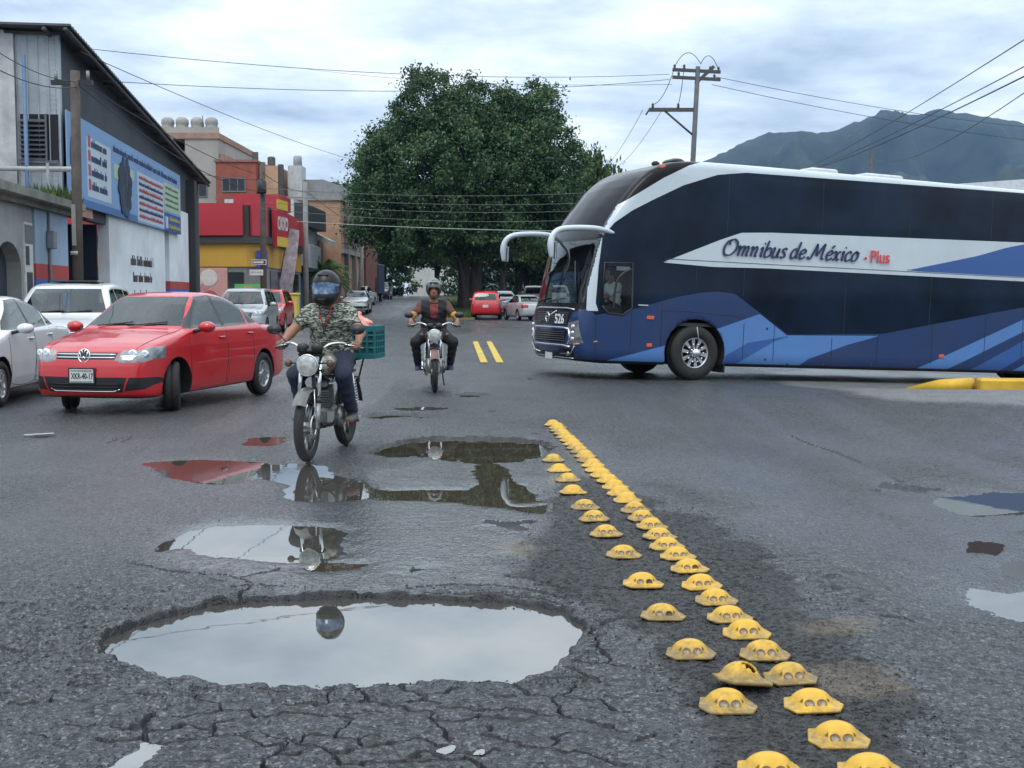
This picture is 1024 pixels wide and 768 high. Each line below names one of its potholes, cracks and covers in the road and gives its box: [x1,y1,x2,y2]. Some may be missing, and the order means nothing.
crack [127,562,284,601]
crack [8,617,663,768]
crack [407,575,570,609]
pothole [97,590,588,691]
pothole [363,435,561,464]
crack [792,435,861,463]
